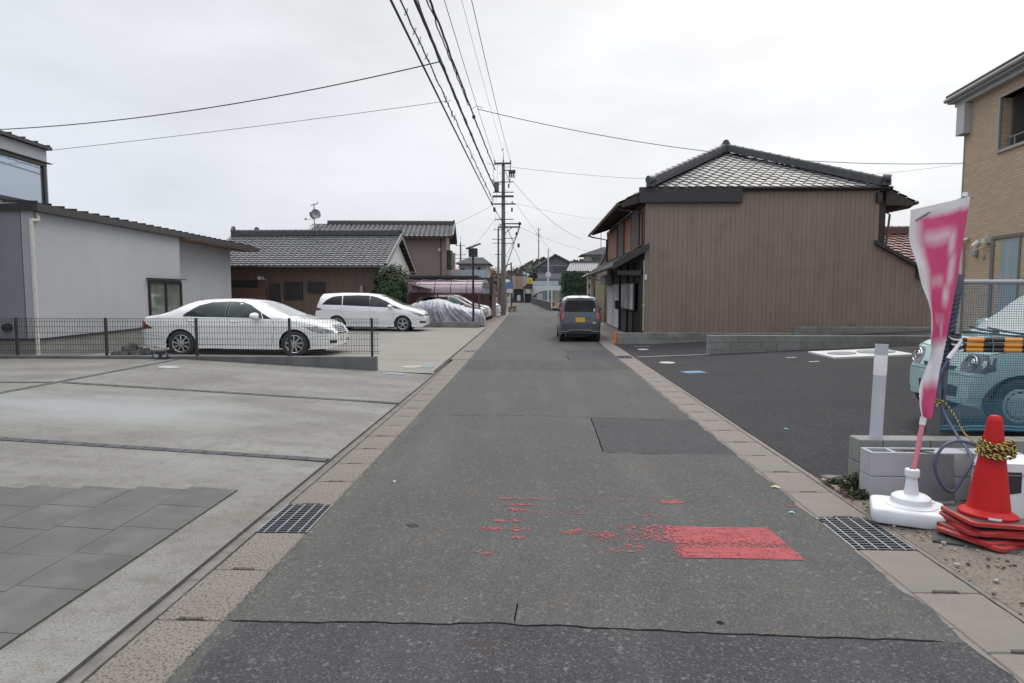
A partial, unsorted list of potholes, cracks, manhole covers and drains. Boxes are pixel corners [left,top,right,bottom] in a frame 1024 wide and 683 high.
drain grate [815,517,916,551]
crack [227,605,941,642]
drain grate [256,504,333,534]
